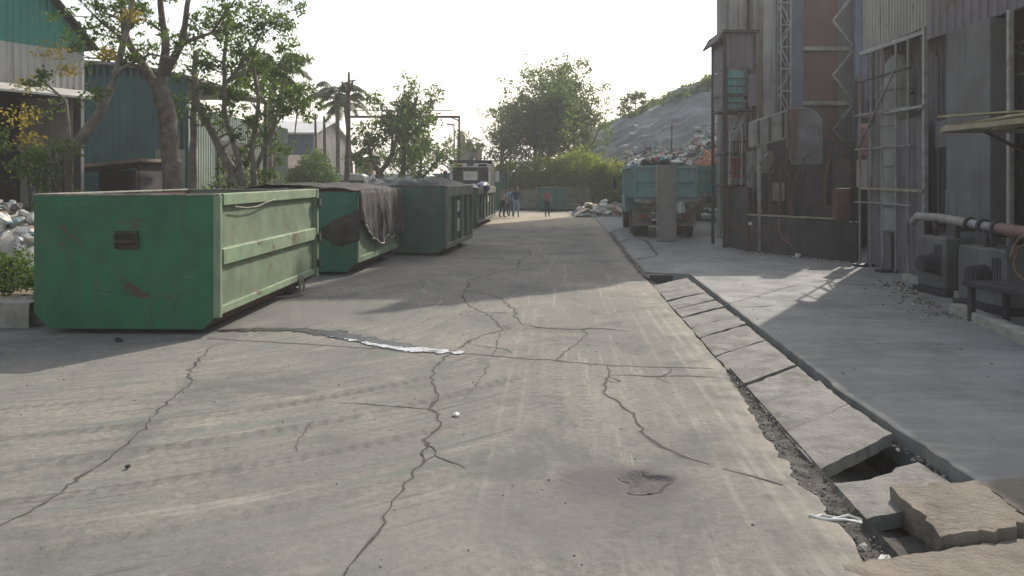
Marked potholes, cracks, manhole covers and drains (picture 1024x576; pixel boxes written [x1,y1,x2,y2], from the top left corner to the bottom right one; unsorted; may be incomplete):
crack [601,366,783,485]
crack [0,346,213,526]
crack [342,249,624,576]
crack [608,231,659,278]
pothole [617,470,673,495]
